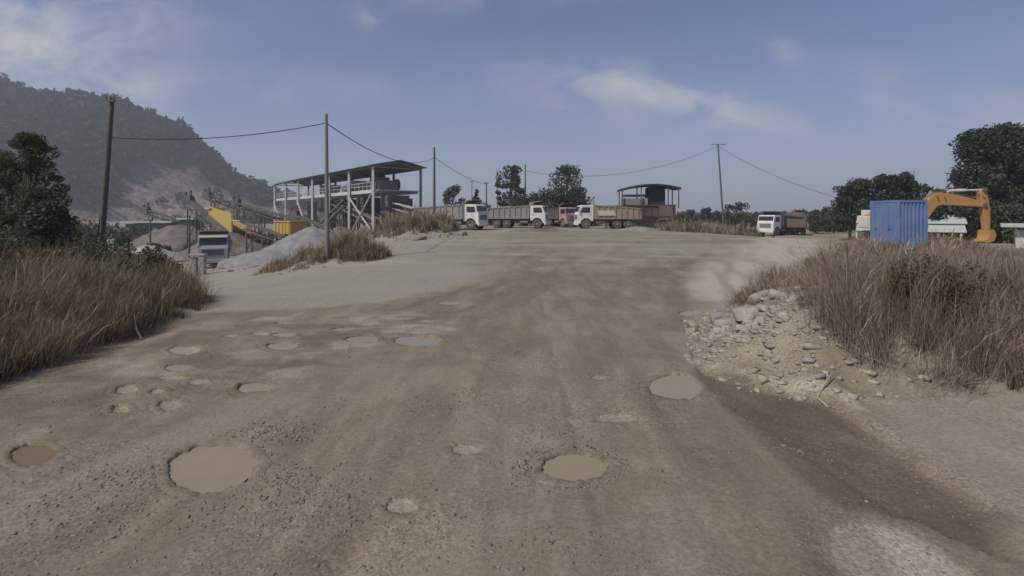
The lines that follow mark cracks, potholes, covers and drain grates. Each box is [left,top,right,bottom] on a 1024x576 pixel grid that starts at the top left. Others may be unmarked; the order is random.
pothole [106,381,148,397]
pothole [387,334,448,348]
pothole [148,395,193,415]
pothole [437,440,497,461]
pothole [227,378,284,397]
pothole [159,344,209,357]
pothole [528,447,623,489]
pothole [257,341,307,352]
pothole [640,370,713,405]
pothole [100,402,140,417]
